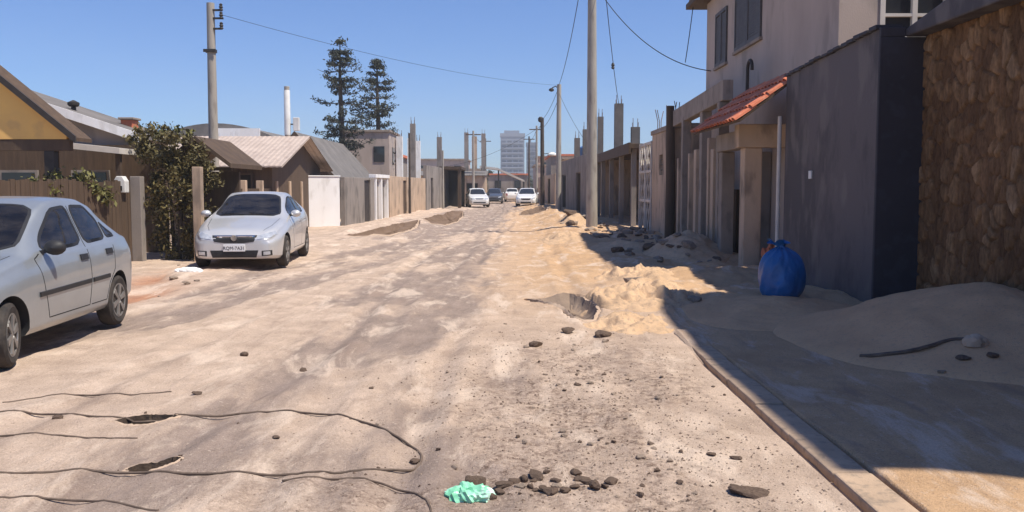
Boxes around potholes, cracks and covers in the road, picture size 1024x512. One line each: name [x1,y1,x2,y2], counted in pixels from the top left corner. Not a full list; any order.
pothole [524,292,601,323]
pothole [345,220,419,237]
pothole [122,456,184,475]
pothole [421,211,463,225]
pothole [111,414,181,426]
